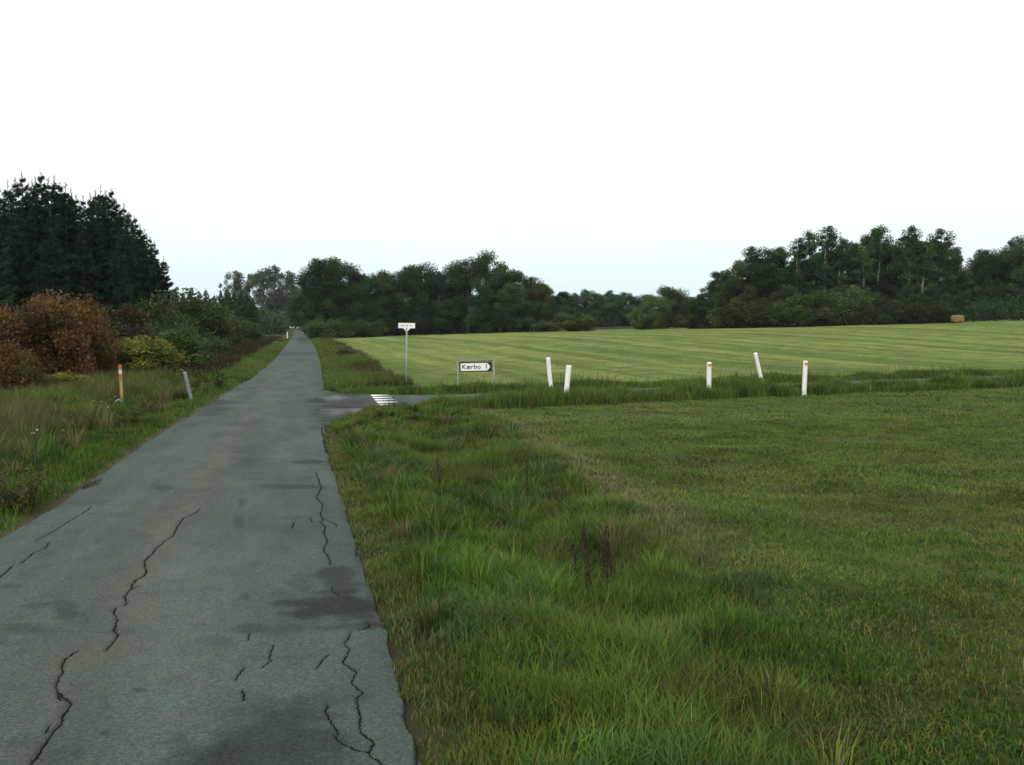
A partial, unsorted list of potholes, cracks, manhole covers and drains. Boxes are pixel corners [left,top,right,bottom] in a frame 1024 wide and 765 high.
crack [236,645,274,702]
crack [29,652,77,765]
crack [0,506,92,578]
crack [292,473,337,565]
crack [316,625,383,765]
crack [106,509,200,651]
